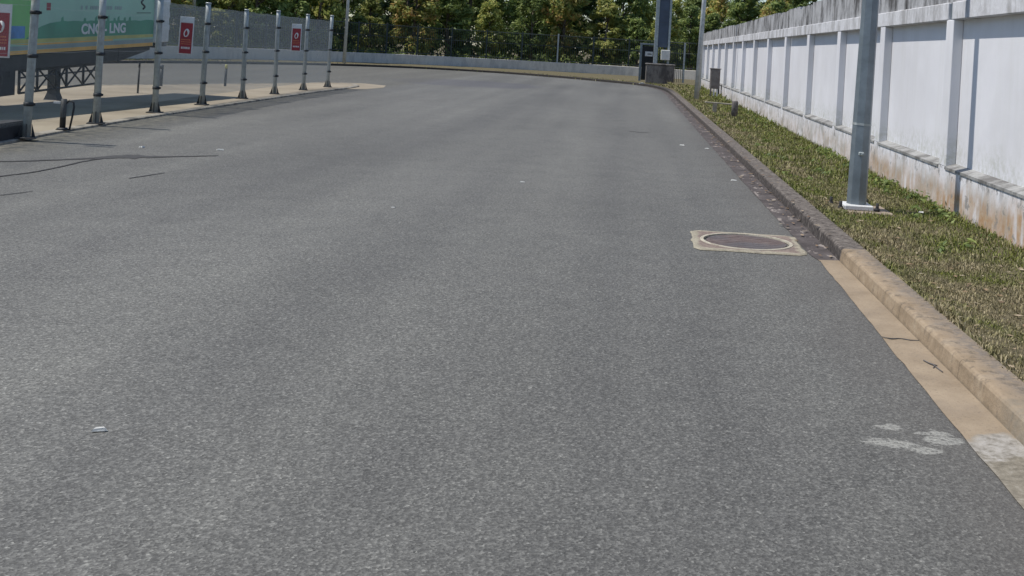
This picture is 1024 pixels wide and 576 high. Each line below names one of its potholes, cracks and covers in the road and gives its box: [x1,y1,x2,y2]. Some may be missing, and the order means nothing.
manhole cover [690,230,807,256]
